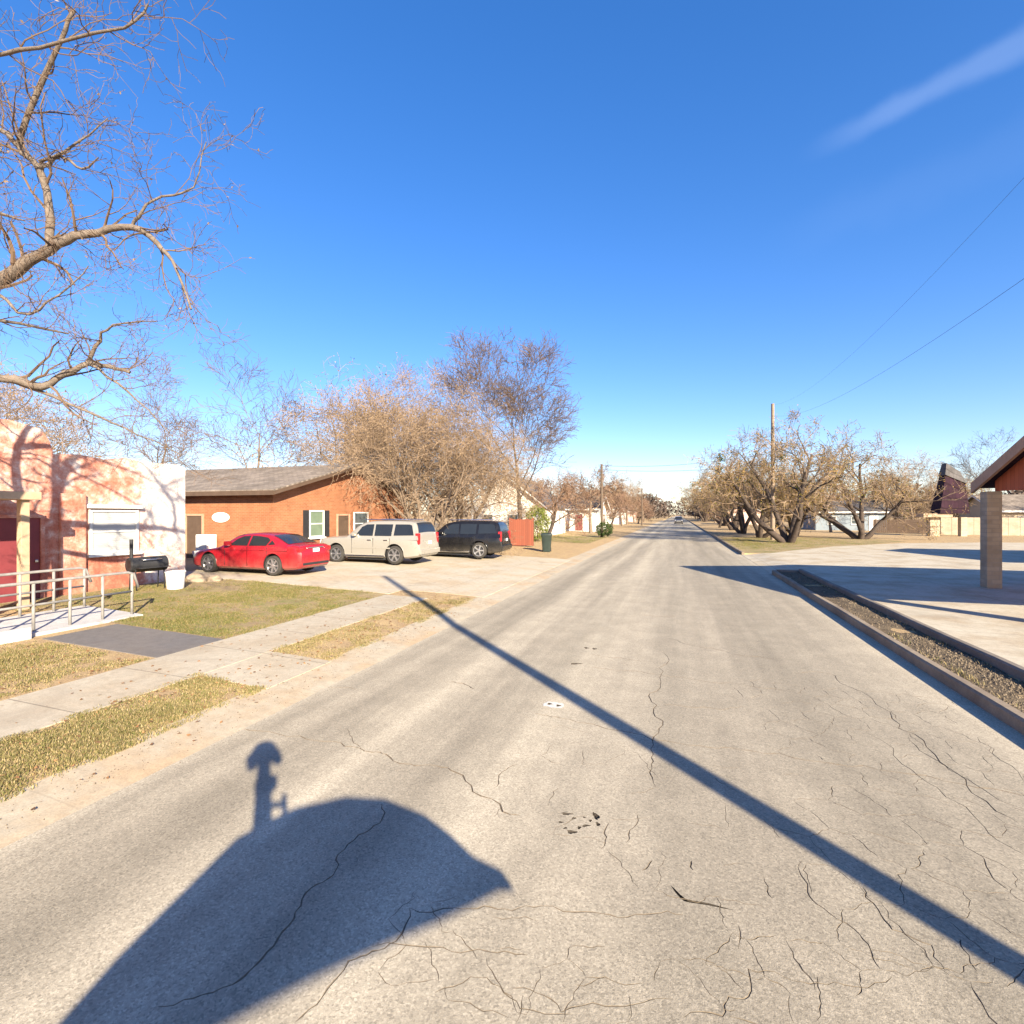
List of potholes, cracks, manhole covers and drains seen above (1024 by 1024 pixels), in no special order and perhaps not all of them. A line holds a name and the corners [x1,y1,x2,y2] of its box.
pothole [559,812,600,834]
crack [158,639,1024,1024]
